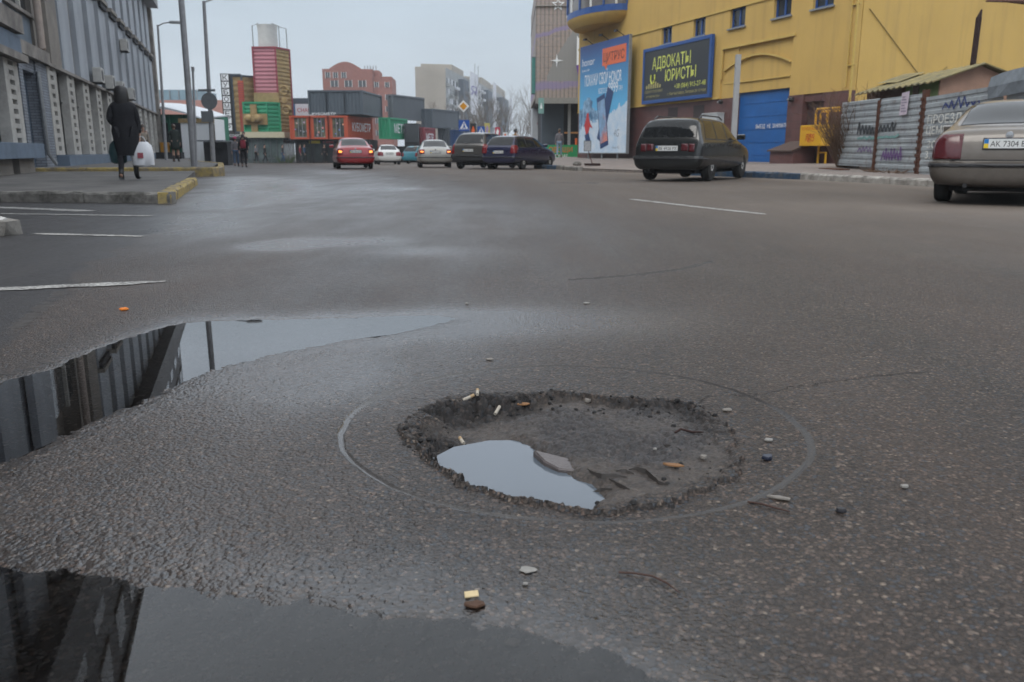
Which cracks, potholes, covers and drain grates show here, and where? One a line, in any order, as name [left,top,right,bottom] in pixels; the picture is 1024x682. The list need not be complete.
pothole [396,388,742,509]
crack [700,372,925,404]
crack [568,261,714,280]
